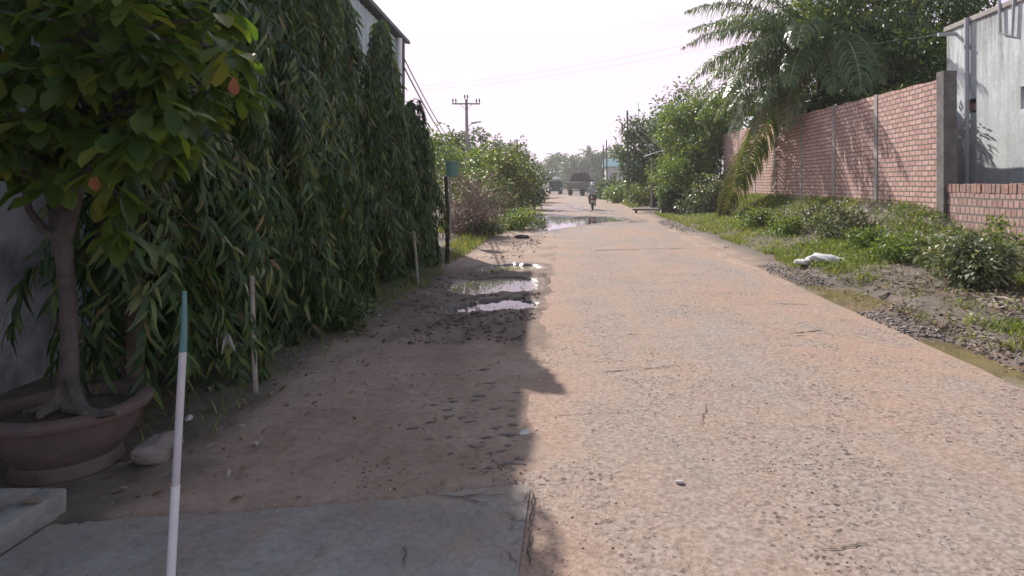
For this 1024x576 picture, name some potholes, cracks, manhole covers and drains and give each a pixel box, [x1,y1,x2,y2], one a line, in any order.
pothole [474,262,549,273]
pothole [437,275,546,297]
pothole [518,215,641,233]
pothole [429,295,549,315]
crack [810,543,866,559]
